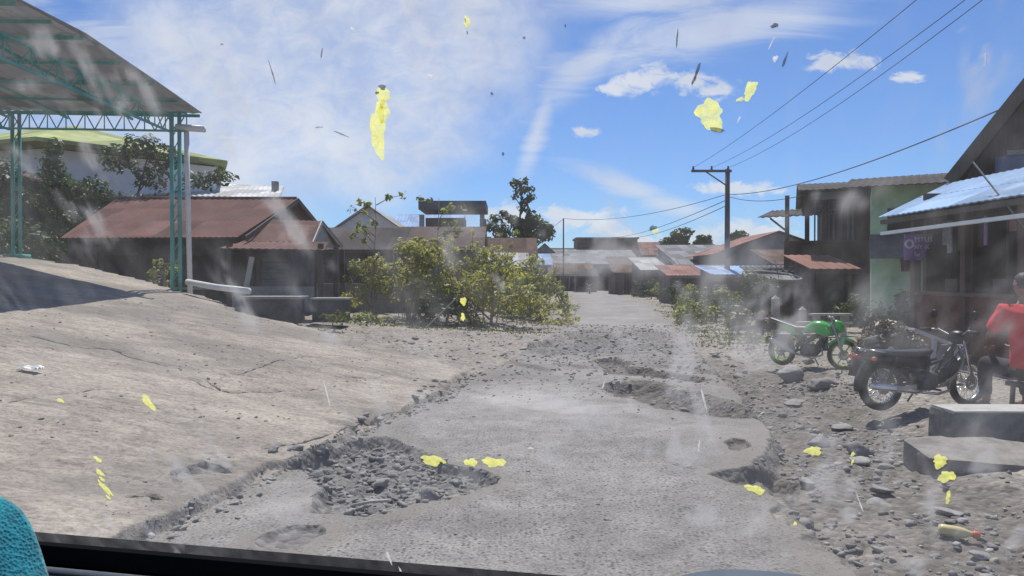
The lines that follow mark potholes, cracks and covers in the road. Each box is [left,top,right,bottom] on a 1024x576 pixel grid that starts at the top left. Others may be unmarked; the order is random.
pothole [522,328,696,357]
pothole [592,356,714,383]
pothole [283,436,502,517]
pothole [251,524,326,550]
pothole [597,380,778,432]
pothole [170,462,231,485]
pothole [723,438,751,451]
pothole [706,464,800,508]
crack [4,333,168,367]
